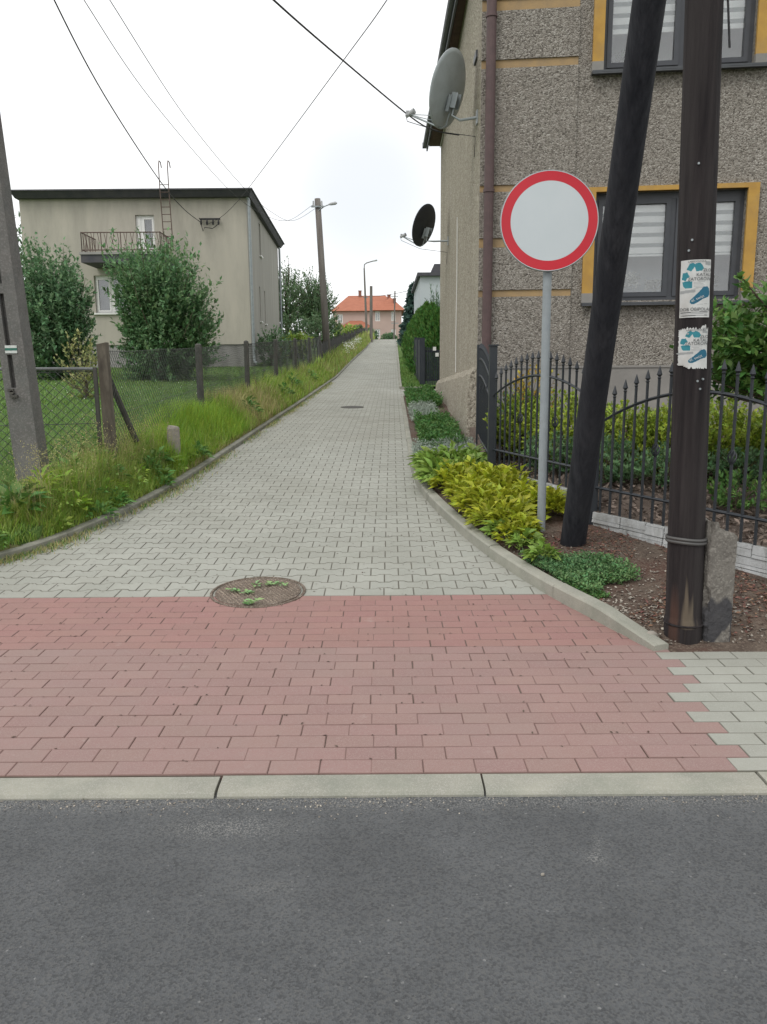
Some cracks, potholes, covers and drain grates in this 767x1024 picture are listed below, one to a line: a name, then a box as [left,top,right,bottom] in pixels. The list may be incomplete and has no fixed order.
manhole cover [210,577,306,608]
